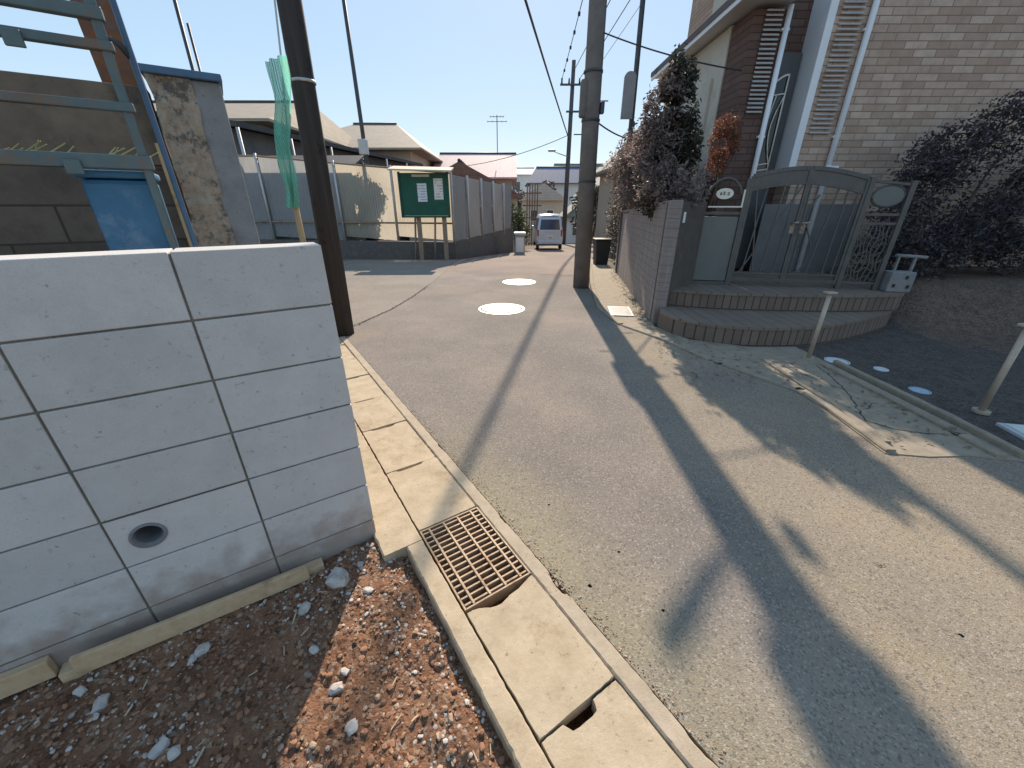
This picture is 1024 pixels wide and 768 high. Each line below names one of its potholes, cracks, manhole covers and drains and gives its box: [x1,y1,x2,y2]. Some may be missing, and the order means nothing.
drain grate [420,507,531,618]
manhole cover [478,303,525,315]
crack [775,362,937,434]
